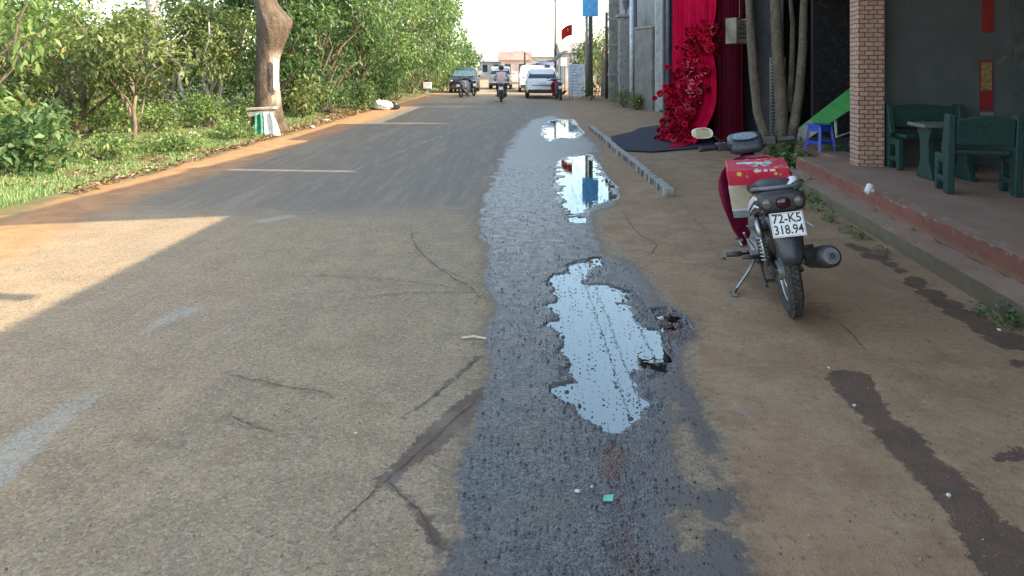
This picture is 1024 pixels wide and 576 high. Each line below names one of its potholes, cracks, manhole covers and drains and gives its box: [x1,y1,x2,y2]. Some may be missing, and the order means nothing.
crack [330,229,488,303]
pothole [540,119,585,141]
pothole [649,307,694,355]
pothole [552,154,620,223]
pothole [535,256,676,436]
crack [332,359,480,550]
